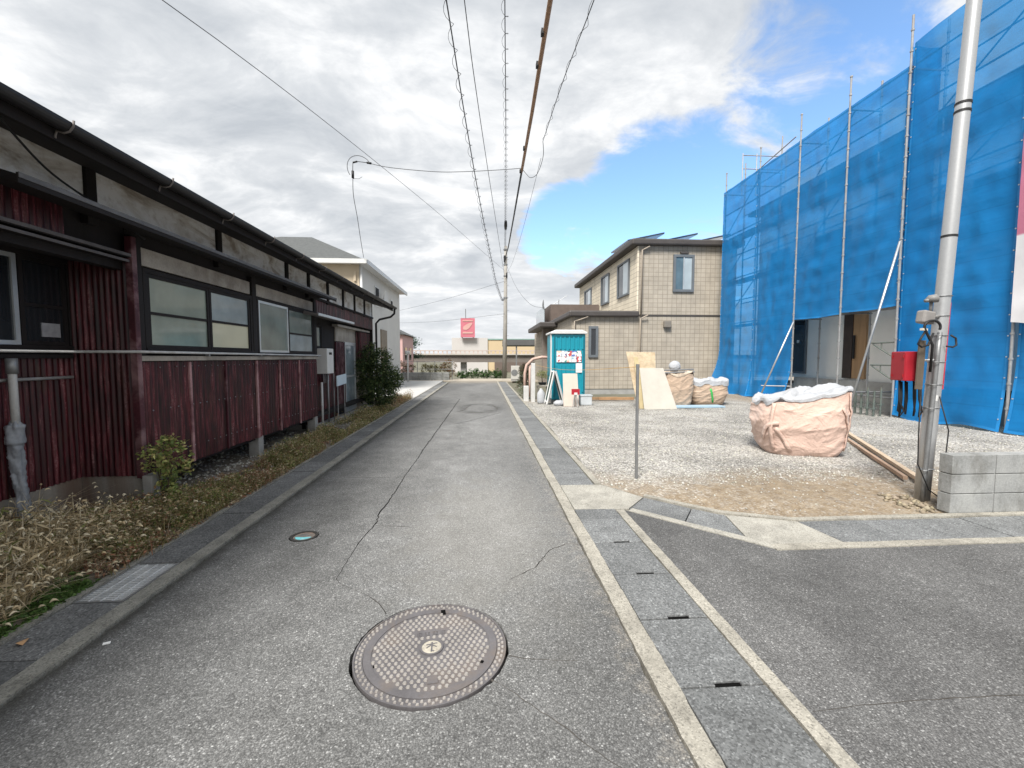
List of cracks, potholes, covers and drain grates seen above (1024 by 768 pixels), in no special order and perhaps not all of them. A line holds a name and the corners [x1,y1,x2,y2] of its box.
crack [491,679,622,768]
manhole cover [352,604,506,712]
crack [336,399,497,614]
drain grate [72,563,179,604]
utility cover [290,531,318,542]
